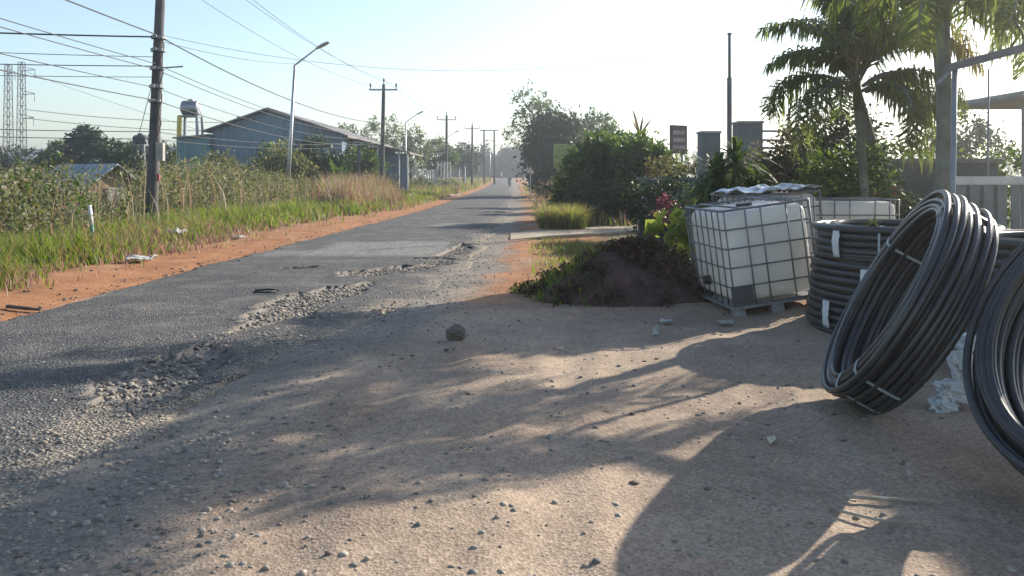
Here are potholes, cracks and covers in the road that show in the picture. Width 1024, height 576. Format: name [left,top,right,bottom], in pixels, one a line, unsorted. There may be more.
pothole [428,242,479,257]
pothole [63,340,239,418]
pothole [328,260,459,278]
pothole [216,279,383,336]
